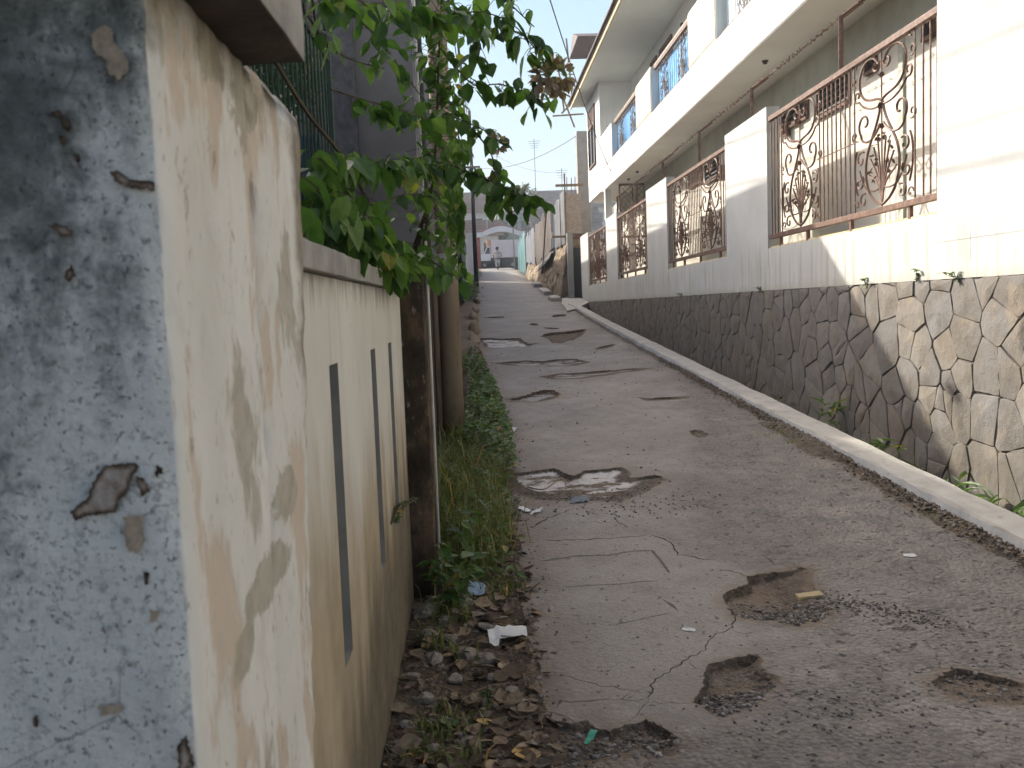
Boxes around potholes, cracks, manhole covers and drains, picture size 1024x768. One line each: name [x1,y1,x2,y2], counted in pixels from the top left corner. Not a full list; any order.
pothole [508,390,561,402]
pothole [539,368,655,380]
pothole [931,668,1024,705]
crack [556,606,755,722]
pothole [692,654,781,718]
pothole [723,567,830,626]
pothole [690,430,708,438]
crack [531,510,745,576]
pothole [531,719,684,768]
pothole [540,329,587,343]
